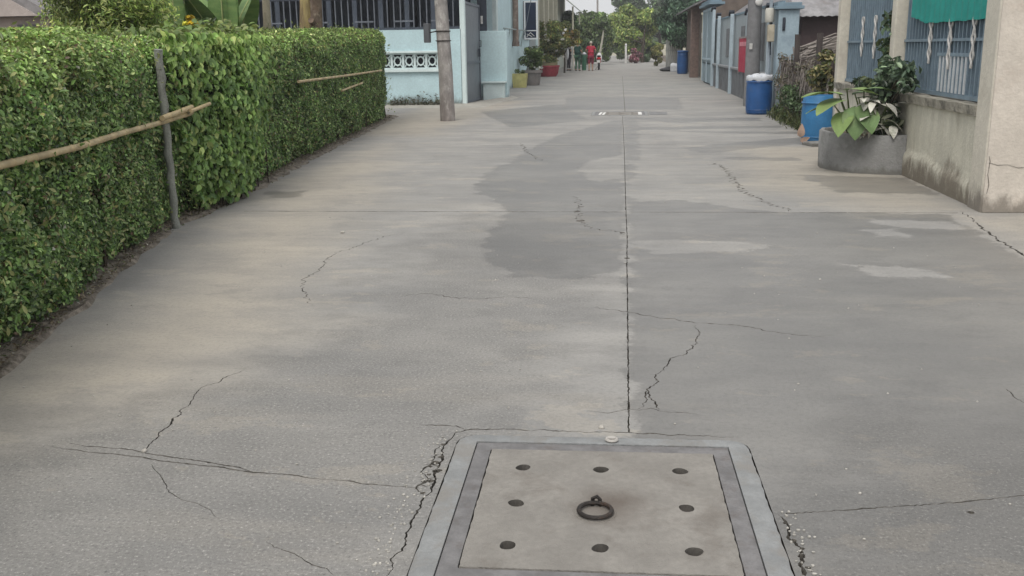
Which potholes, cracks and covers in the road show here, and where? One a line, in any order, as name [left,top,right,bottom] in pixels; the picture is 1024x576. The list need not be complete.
crack [573,197,628,238]
manhole cover [408,435,794,576]
crack [780,516,811,576]
crack [387,425,724,576]
crack [704,163,800,212]
crack [301,232,407,305]
crack [594,307,819,415]
crack [52,371,417,520]
